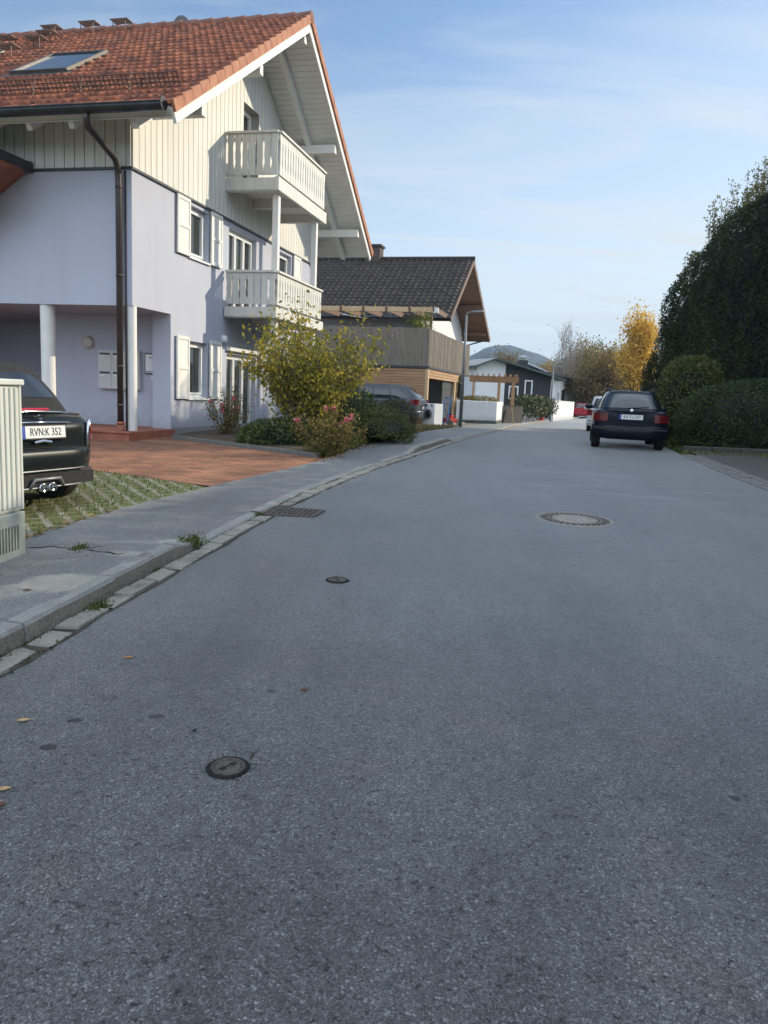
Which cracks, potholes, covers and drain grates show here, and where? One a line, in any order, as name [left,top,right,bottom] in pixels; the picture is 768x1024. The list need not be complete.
utility cover [205,756,251,780]
crack [29,546,124,555]
utility cover [325,576,350,584]
manhole cover [536,512,614,527]
